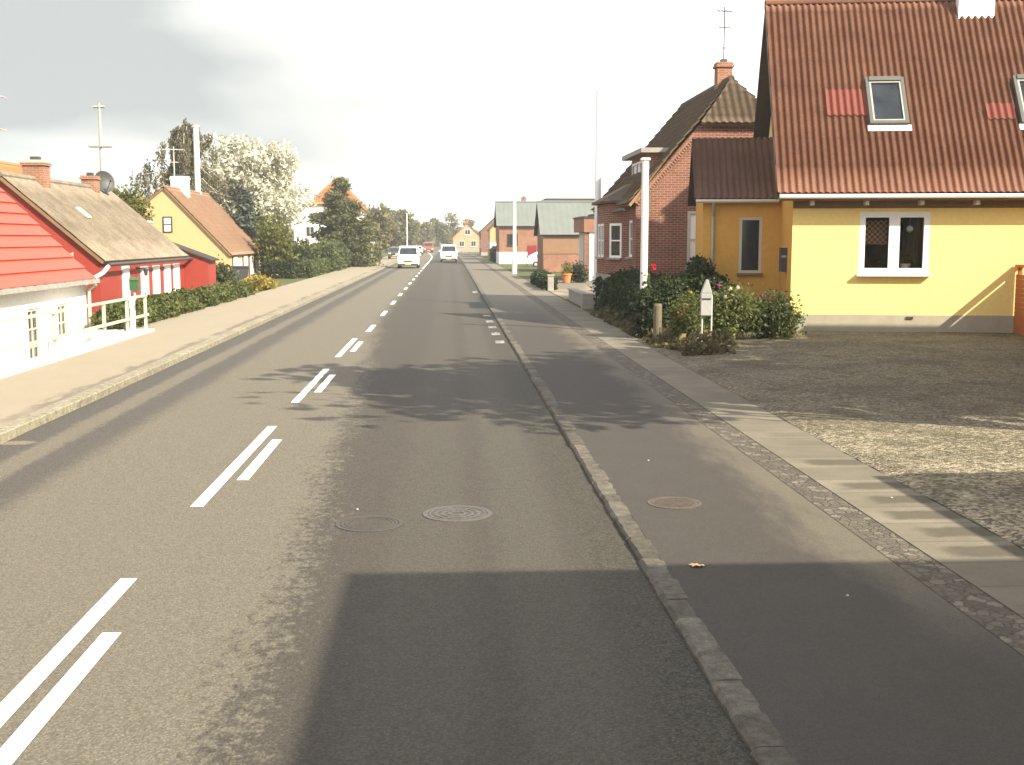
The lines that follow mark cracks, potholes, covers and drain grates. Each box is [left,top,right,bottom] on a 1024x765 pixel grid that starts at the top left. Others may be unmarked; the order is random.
manhole cover [335,515,404,532]
manhole cover [423,505,492,522]
manhole cover [647,497,702,509]
